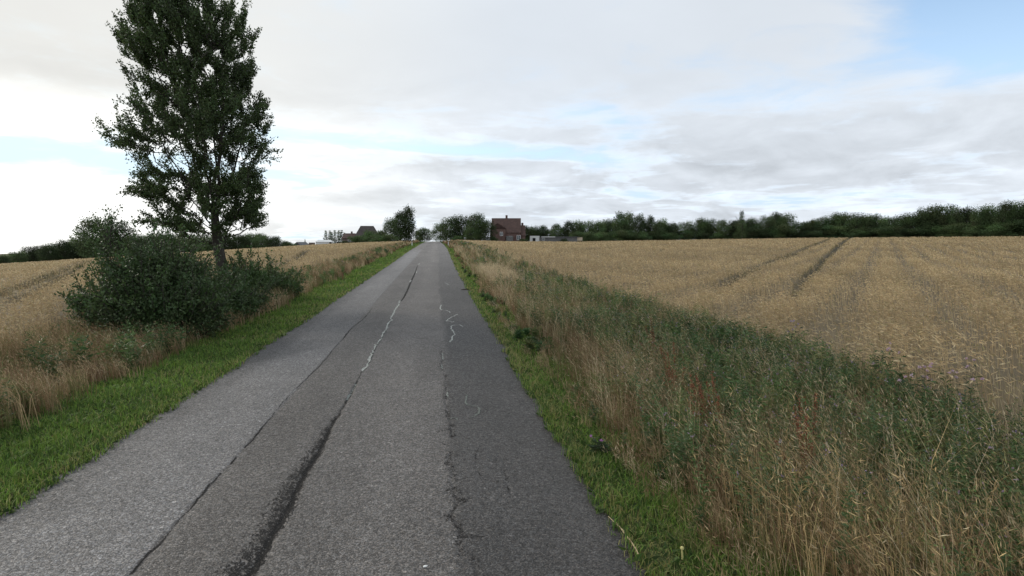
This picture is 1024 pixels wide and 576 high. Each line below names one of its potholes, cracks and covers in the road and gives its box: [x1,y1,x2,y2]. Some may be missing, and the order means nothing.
crack [439,305,483,570]
crack [215,264,419,576]
